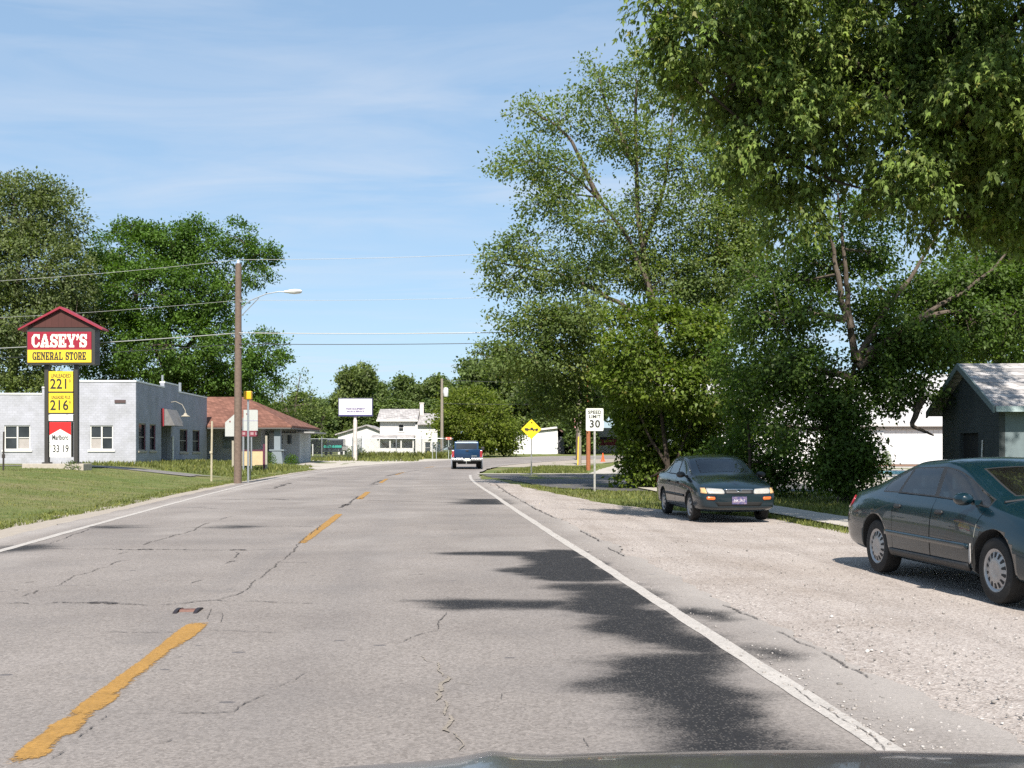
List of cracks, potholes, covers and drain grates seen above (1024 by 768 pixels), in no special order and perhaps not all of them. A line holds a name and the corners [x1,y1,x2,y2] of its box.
crack [725,605,869,677]
crack [14,516,320,633]
crack [141,673,304,713]
crack [404,612,469,750]
crack [496,484,624,556]
